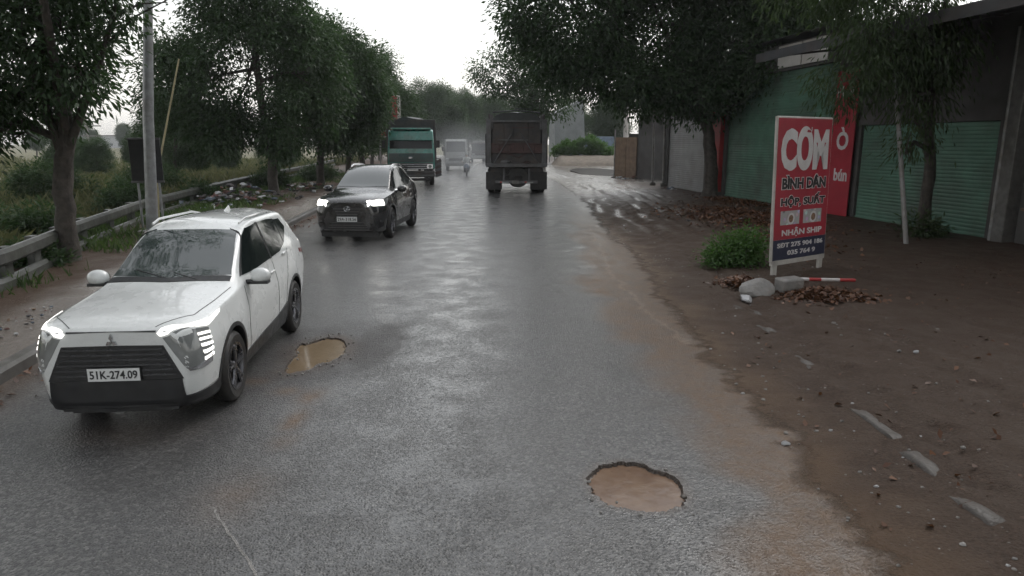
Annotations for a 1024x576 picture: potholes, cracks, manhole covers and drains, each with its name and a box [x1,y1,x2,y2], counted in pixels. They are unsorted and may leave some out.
pothole [576,457,699,518]
crack [212,507,258,576]
pothole [280,336,353,376]
